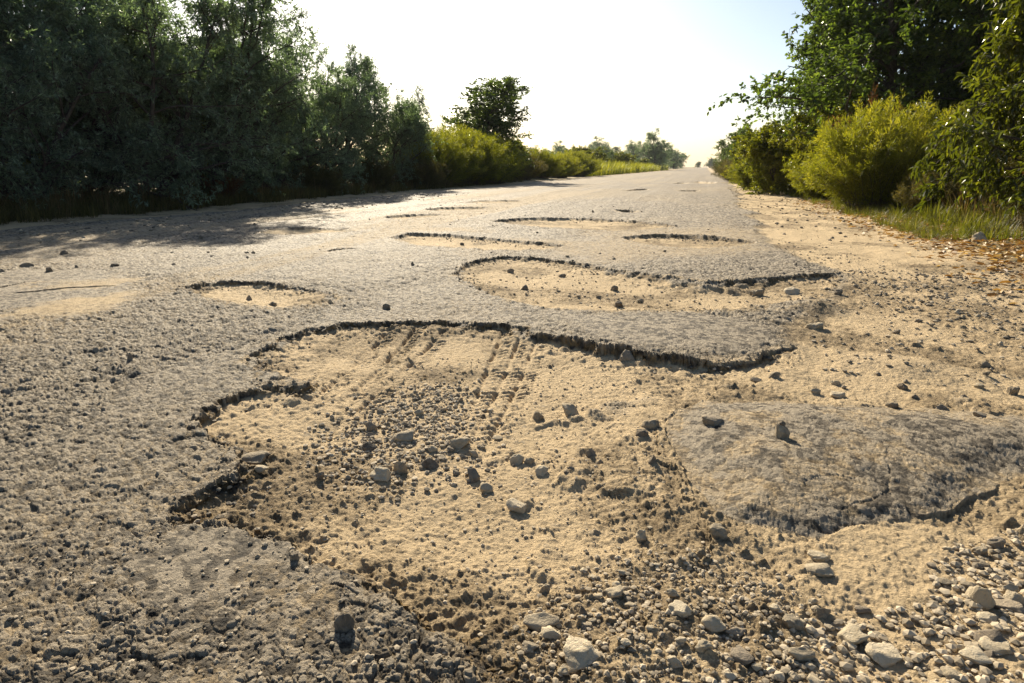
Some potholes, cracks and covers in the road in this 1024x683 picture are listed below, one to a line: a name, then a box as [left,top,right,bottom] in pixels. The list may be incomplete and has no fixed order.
pothole [493,217,679,231]
pothole [622,234,756,249]
pothole [453,256,856,312]
crack [0,282,112,293]
pothole [183,280,339,308]
pothole [390,232,567,250]
pothole [161,319,798,683]
